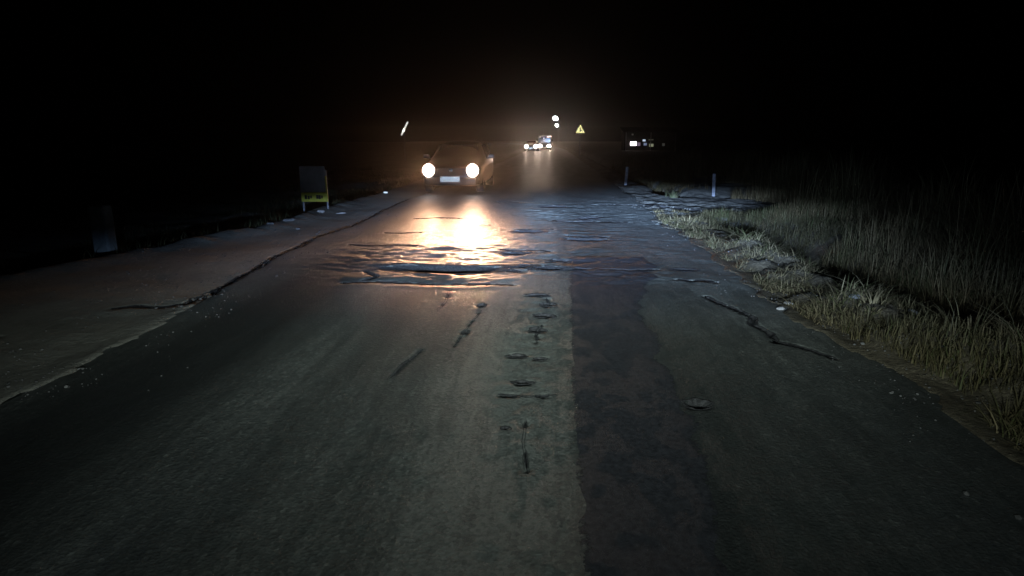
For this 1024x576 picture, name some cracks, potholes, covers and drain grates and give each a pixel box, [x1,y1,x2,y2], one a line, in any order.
crack [387,349,423,379]
pothole [680,398,714,410]
crack [678,279,837,359]
crack [111,199,460,310]
pothole [361,262,529,276]
crack [453,312,481,347]
